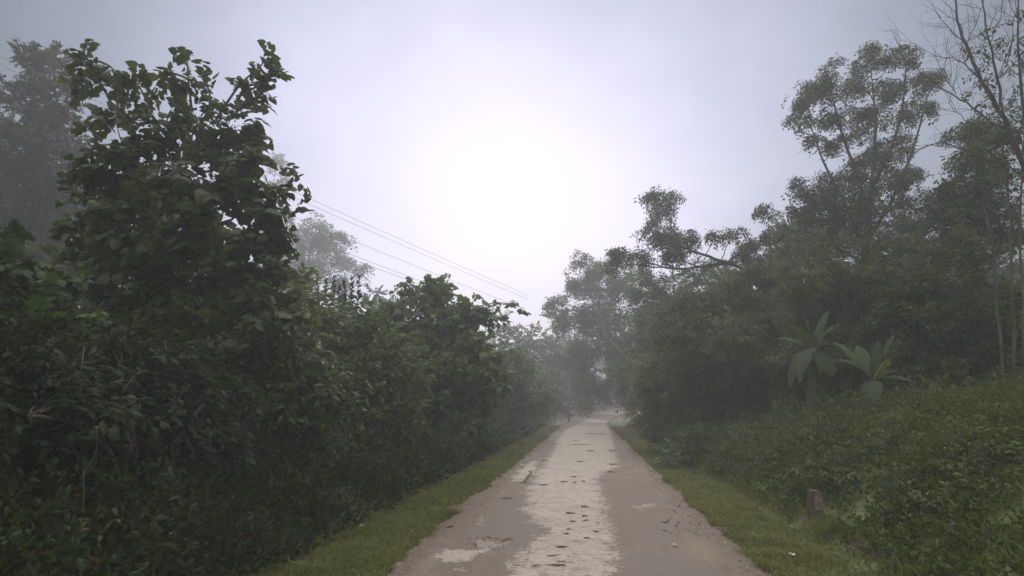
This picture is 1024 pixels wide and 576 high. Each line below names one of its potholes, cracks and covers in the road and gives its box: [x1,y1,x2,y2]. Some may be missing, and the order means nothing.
crack [661,509,708,537]
pothole [537,553,581,562]
